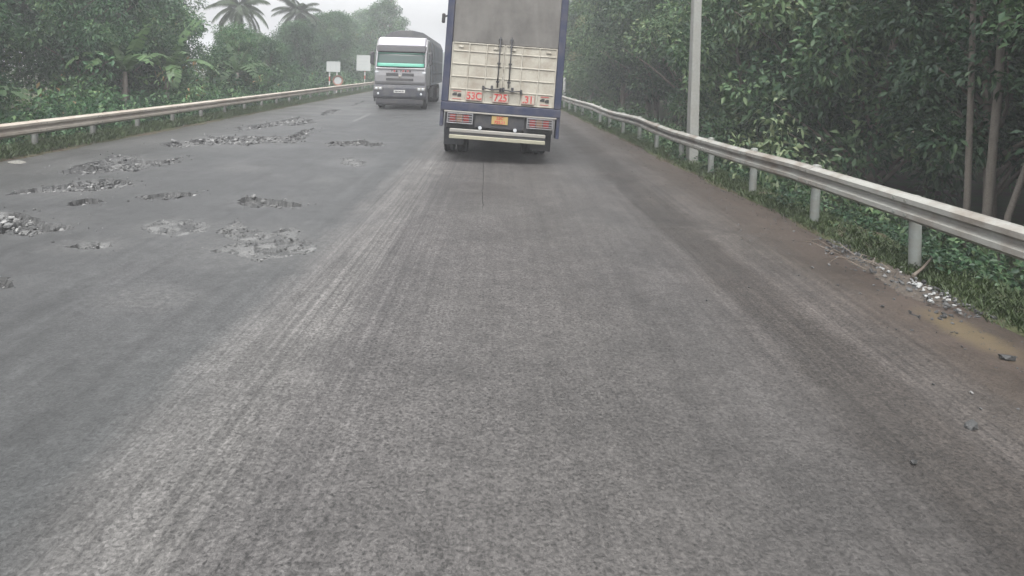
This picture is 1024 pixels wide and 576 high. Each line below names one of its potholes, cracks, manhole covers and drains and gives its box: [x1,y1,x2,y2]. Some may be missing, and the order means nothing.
pothole [0,204,97,242]
pothole [6,176,161,195]
pothole [67,197,107,206]
pothole [127,189,208,204]
pothole [325,139,385,147]
pothole [0,277,19,289]
pothole [186,218,317,274]
pothole [329,157,374,172]
pothole [227,116,317,131]
pothole [233,194,316,209]
pothole [140,213,224,247]
pothole [36,242,114,251]
